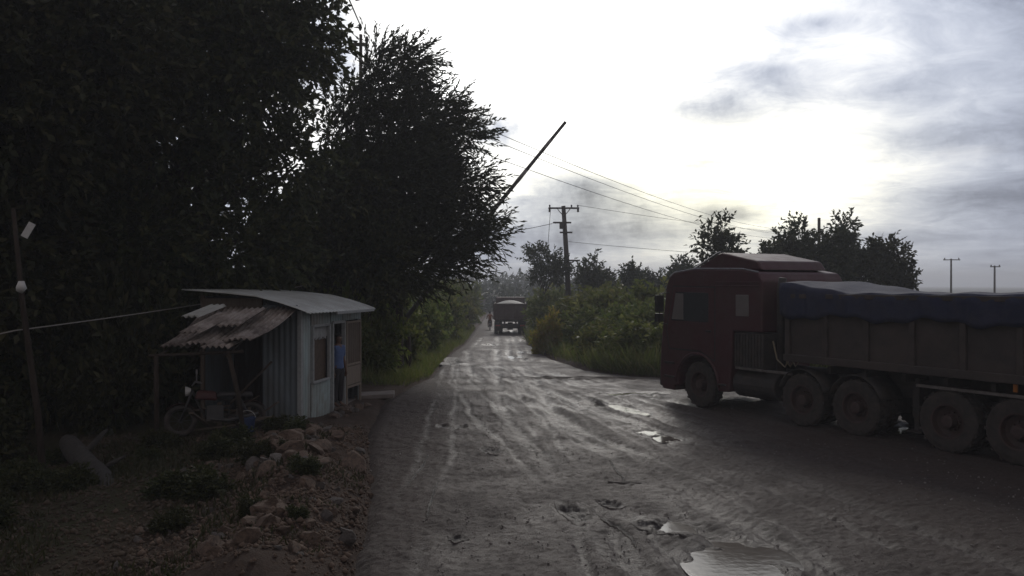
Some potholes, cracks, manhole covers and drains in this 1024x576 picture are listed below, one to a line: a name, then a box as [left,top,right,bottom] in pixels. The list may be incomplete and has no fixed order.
pothole [632,426,693,445]
pothole [595,497,627,509]
pothole [629,516,702,538]
pothole [589,396,655,417]
pothole [665,535,816,576]
pothole [447,533,470,544]
pothole [554,497,603,527]
